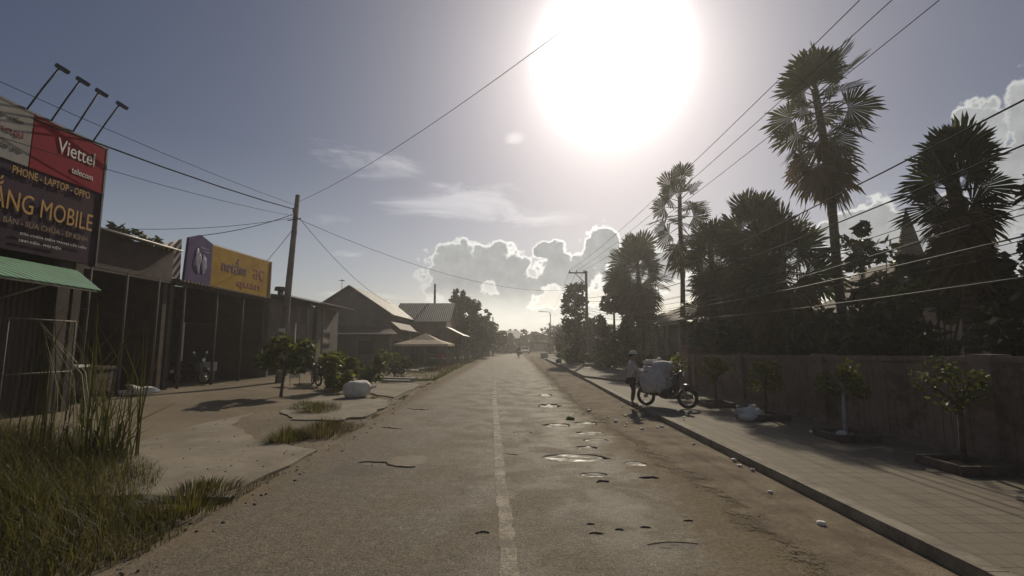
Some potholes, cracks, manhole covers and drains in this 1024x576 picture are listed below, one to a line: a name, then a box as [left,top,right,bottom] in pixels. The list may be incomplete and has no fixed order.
pothole [542,454,611,462]
